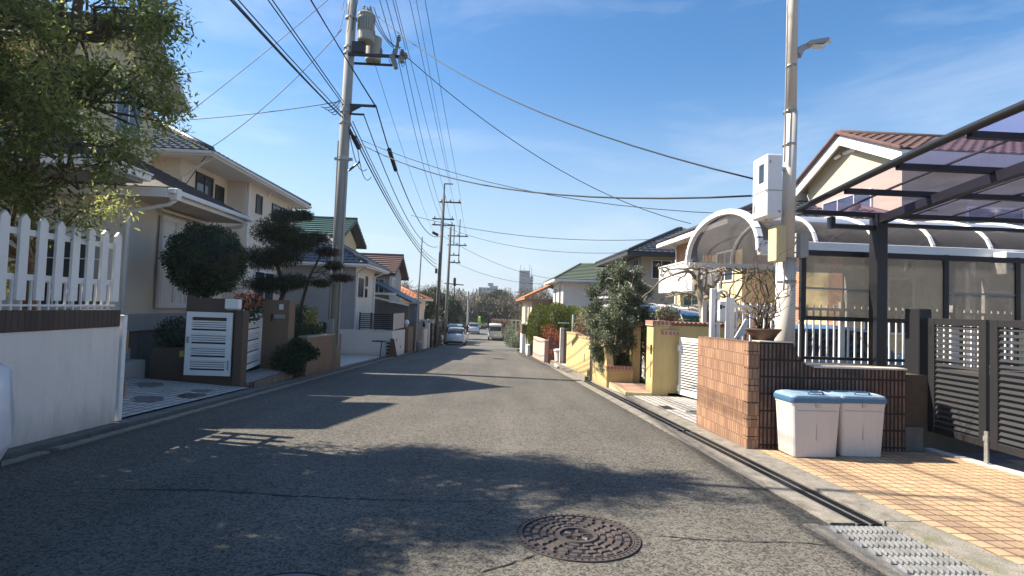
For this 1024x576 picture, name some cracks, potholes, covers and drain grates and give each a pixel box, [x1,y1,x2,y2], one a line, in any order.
crack [480,554,536,573]
manhole cover [515,513,641,563]
